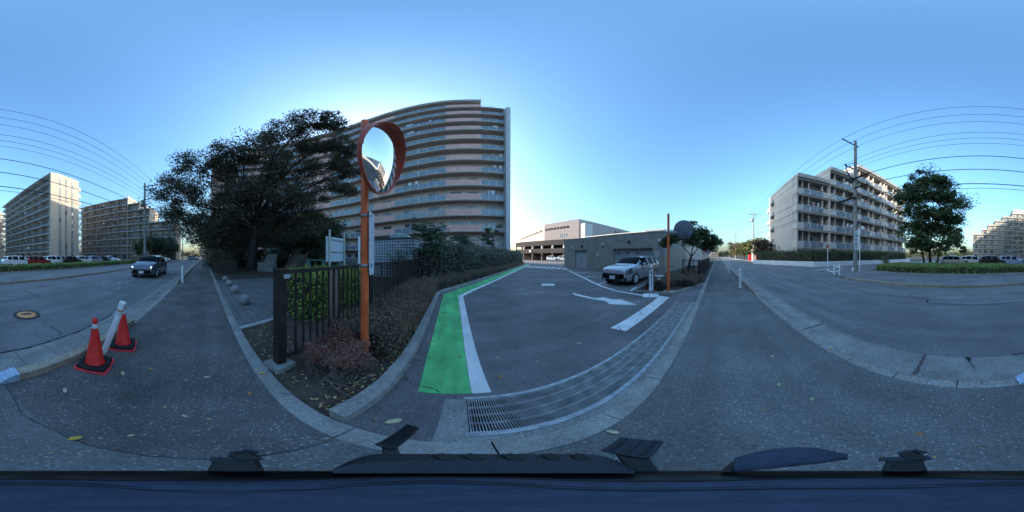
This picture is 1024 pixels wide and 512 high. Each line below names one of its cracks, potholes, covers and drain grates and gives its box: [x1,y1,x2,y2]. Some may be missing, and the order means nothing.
manhole cover [13,310,40,320]
